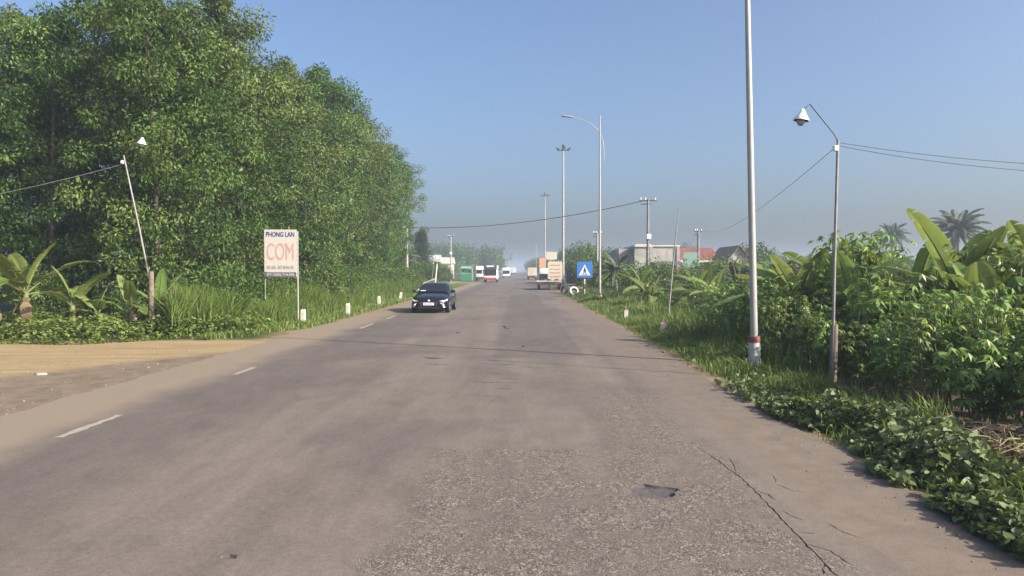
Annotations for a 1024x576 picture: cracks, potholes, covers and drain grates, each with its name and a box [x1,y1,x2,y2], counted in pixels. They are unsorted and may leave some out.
pothole [624,484,679,498]
